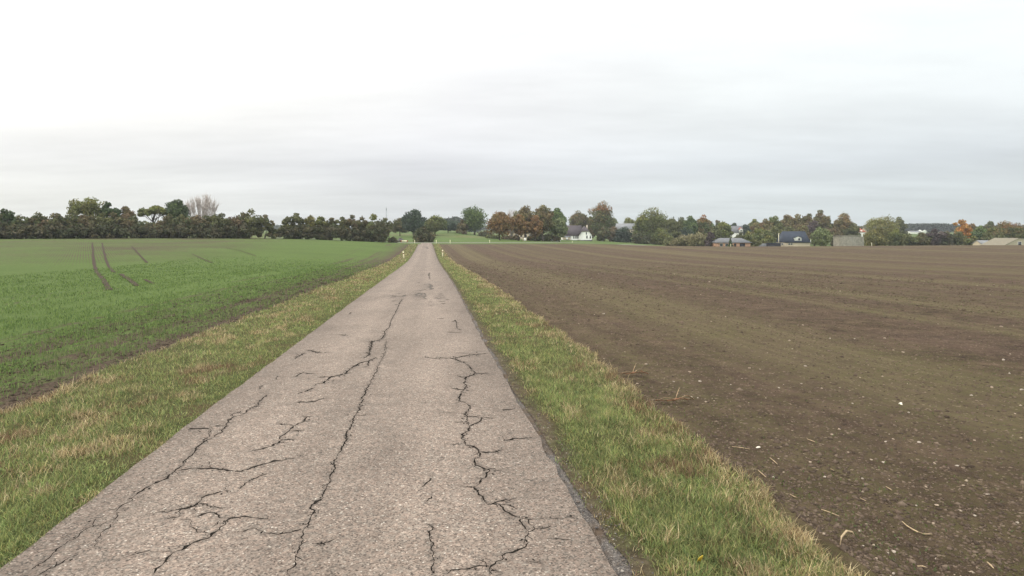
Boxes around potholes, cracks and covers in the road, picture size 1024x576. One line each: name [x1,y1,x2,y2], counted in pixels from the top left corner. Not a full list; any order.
crack [425,352,574,575]
crack [32,273,461,576]
